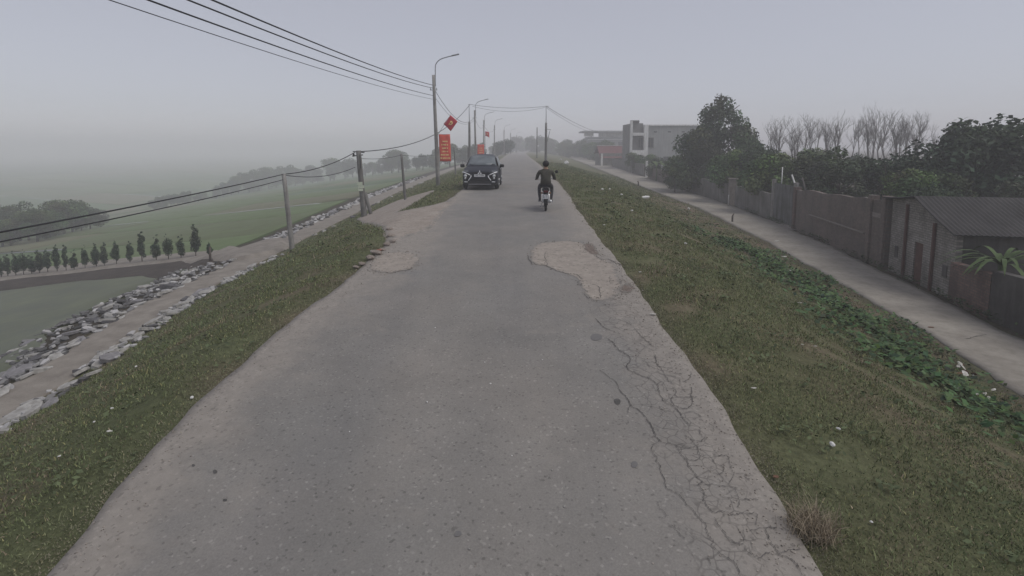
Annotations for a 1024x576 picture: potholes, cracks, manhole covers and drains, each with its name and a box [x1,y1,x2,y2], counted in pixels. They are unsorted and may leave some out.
crack [595,318,804,574]
